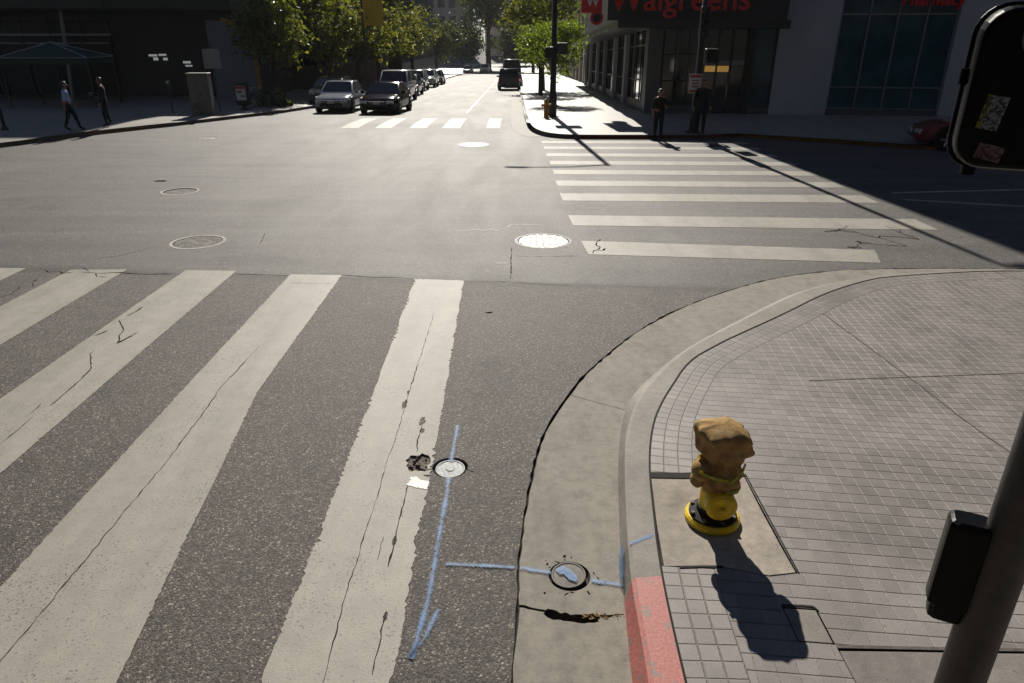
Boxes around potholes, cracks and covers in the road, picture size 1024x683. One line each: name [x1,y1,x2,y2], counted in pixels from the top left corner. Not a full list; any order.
utility cover [432,458,468,478]
pothole [406,454,431,472]
manhole cover [169,235,226,249]
crack [824,226,918,249]
manhole cover [515,233,572,249]
utility cover [549,562,590,591]
